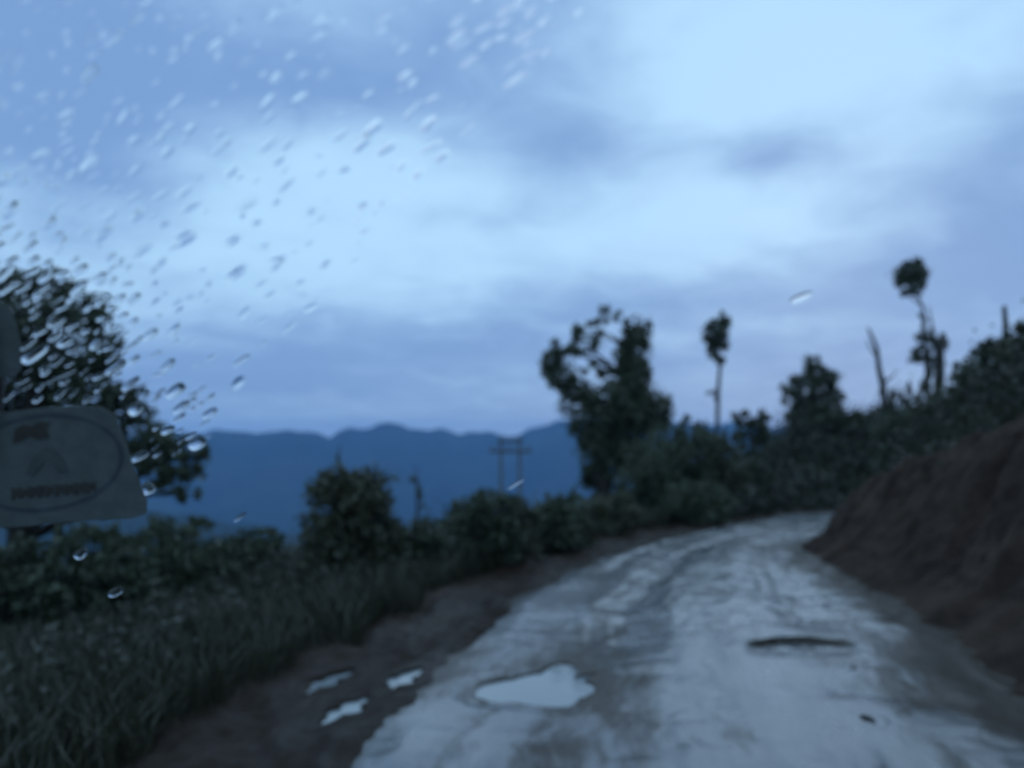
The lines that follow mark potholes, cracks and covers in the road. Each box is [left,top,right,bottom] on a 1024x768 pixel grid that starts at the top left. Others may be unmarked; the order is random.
pothole [451,658,616,716]
